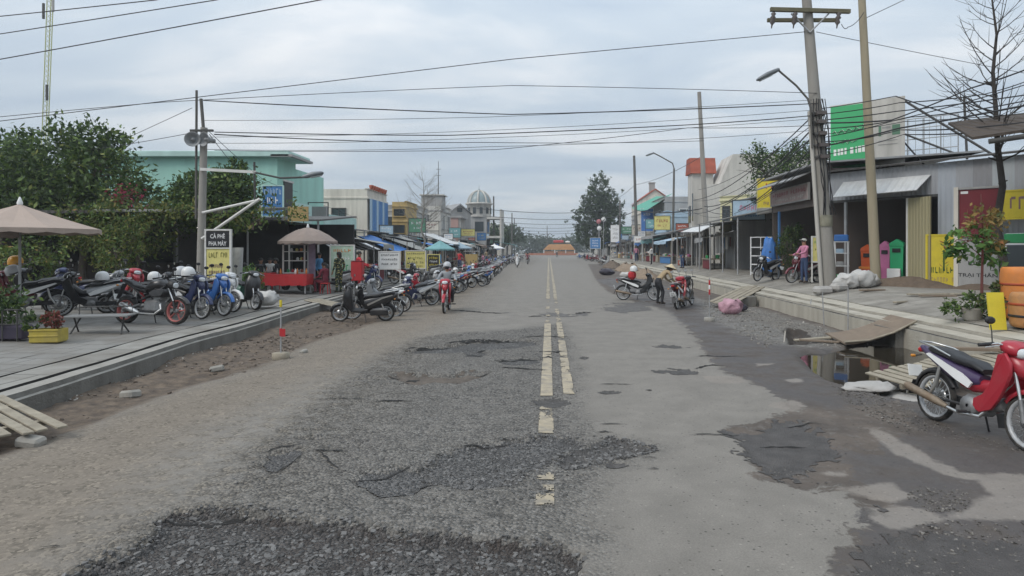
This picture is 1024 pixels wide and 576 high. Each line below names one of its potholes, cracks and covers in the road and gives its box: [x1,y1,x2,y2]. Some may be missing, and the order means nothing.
pothole [417,434,580,488]
pothole [559,438,651,466]
pothole [534,397,570,408]
pothole [388,370,483,385]
pothole [263,450,302,472]
pothole [79,507,582,576]
pothole [412,341,536,355]
pothole [356,469,429,498]
